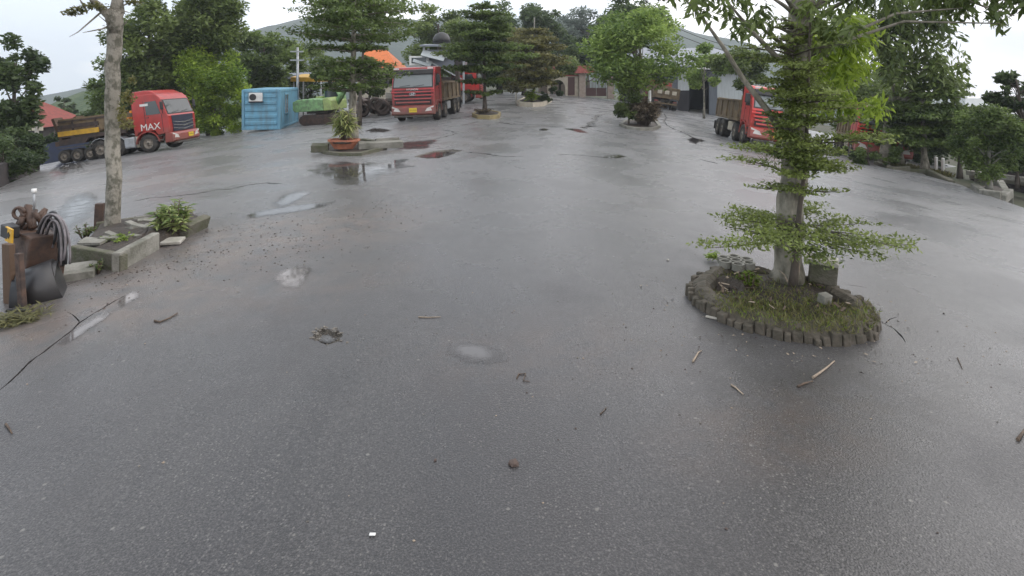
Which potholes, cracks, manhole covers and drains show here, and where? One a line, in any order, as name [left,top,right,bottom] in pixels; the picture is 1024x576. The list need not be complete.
crack [132,183,281,202]
pothole [309,326,349,345]
crack [663,114,694,138]
pothole [415,149,462,159]
